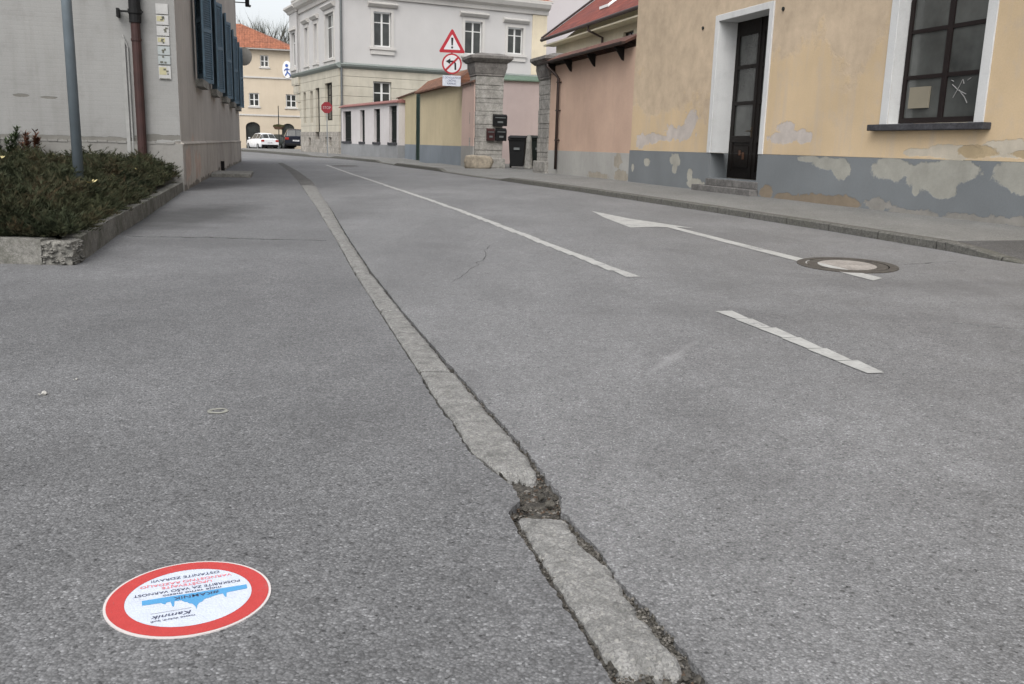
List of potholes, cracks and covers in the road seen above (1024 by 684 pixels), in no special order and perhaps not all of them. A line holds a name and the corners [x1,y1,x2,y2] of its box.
manhole cover [797,257,899,274]
crack [339,244,544,482]
pothole [496,473,570,524]
